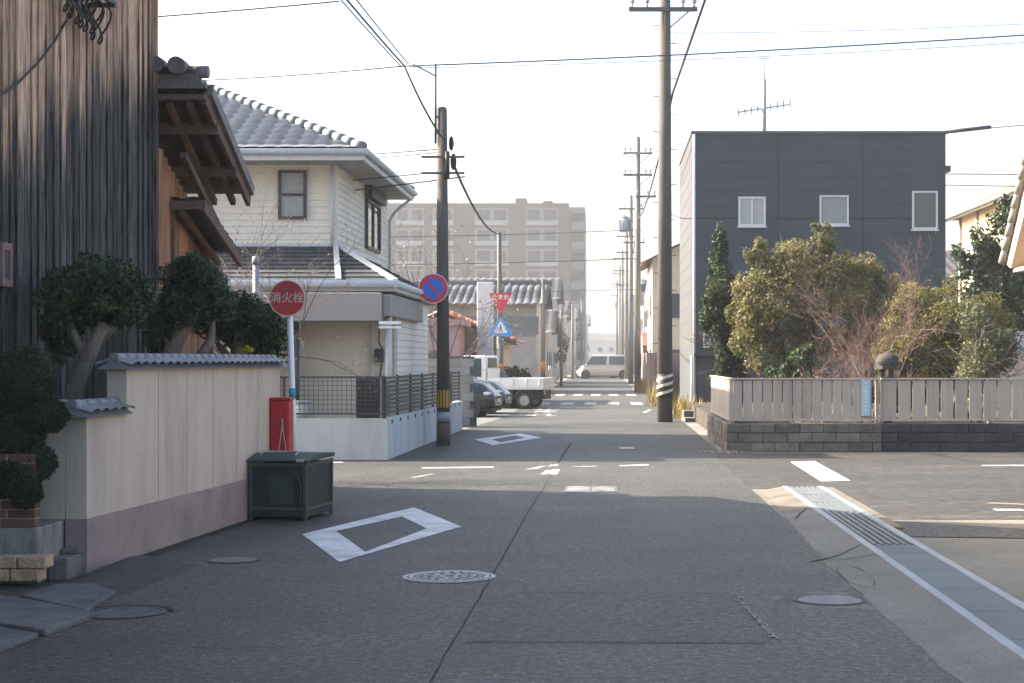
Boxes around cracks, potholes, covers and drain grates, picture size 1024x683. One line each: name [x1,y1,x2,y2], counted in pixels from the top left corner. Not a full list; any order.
manhole cover [792,594,867,605]
manhole cover [402,570,496,583]
manhole cover [89,606,167,619]
